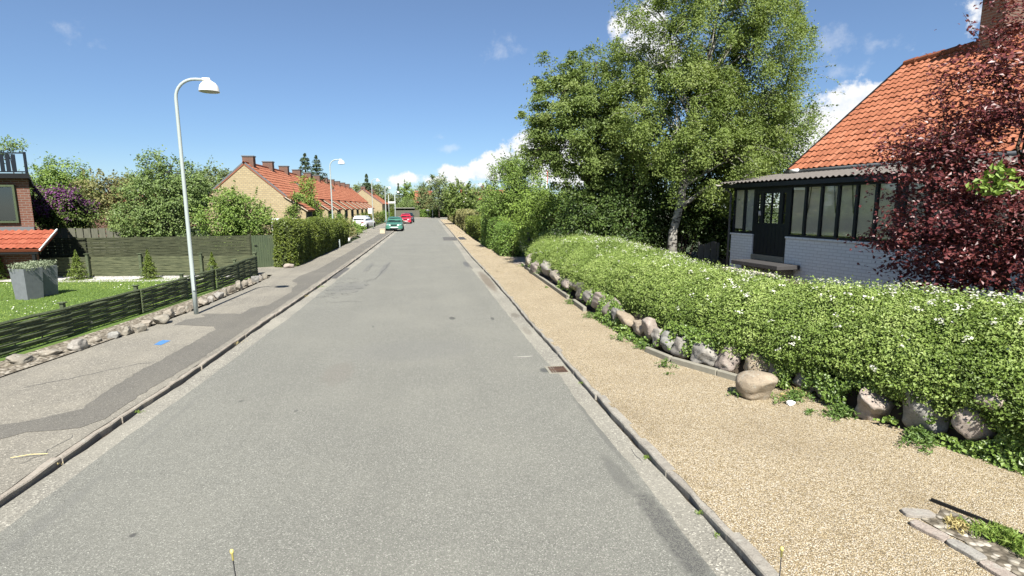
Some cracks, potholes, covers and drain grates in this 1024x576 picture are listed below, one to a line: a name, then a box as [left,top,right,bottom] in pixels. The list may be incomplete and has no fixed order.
drain grate [544,365,571,374]
